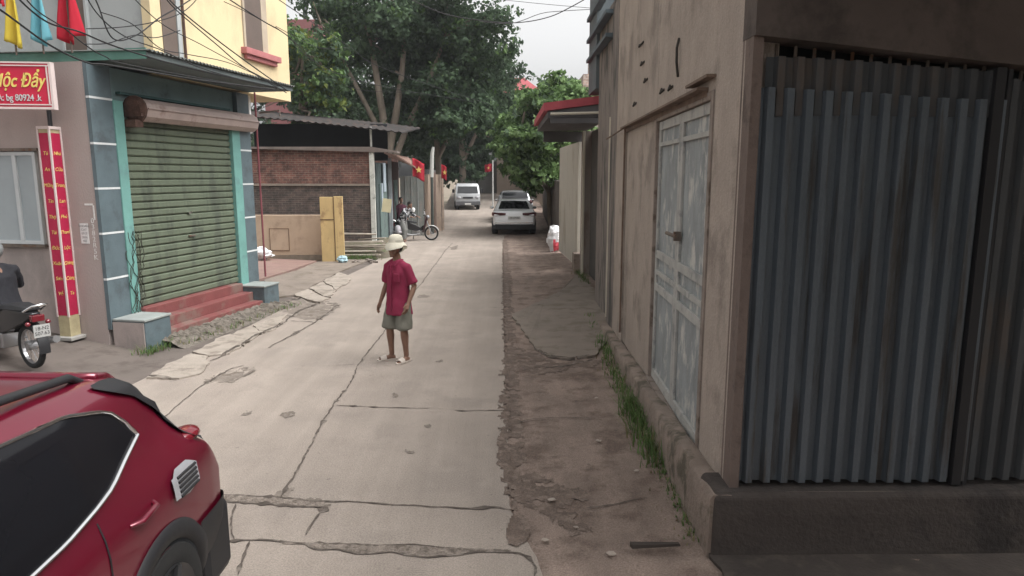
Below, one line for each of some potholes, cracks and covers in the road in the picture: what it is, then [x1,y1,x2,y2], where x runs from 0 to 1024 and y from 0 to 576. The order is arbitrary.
crack [537,348,592,368]
crack [165,301,339,416]
crack [224,246,537,576]
